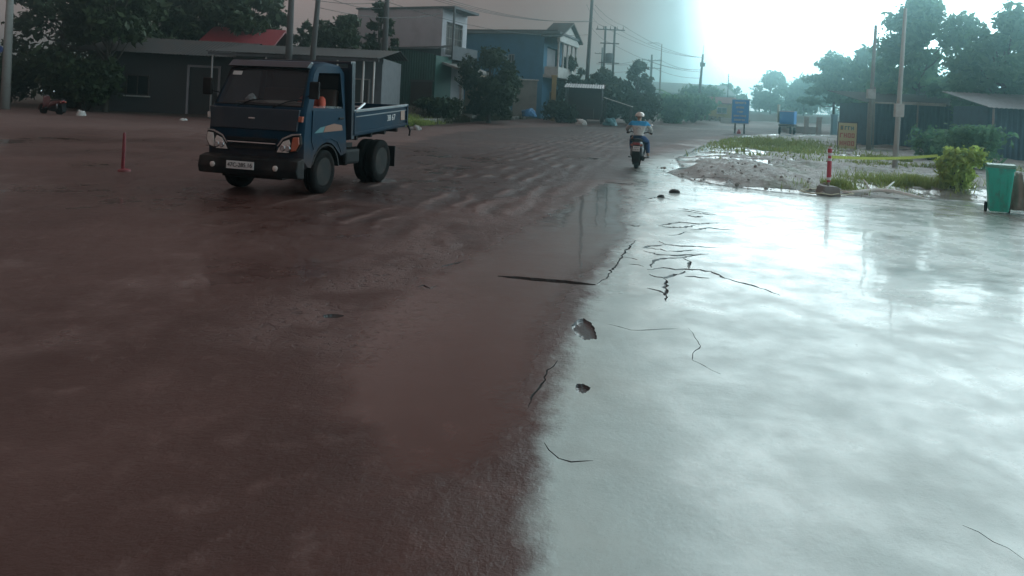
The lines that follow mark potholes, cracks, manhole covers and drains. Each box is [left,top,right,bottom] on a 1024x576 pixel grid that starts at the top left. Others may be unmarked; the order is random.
crack [498,198,779,301]
pothole [572,318,597,340]
crack [609,324,720,374]
pothole [576,384,591,393]
crack [528,360,558,407]
